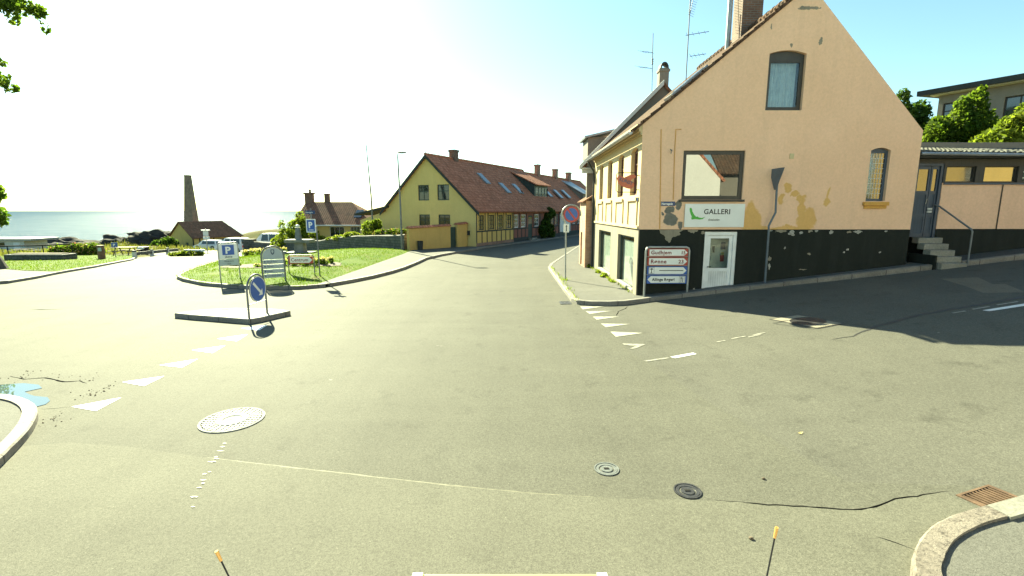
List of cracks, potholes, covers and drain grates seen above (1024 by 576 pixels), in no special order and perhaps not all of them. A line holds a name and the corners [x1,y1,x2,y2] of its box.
crack [717,491,946,510]
utility cover [594,462,619,476]
utility cover [673,483,702,499]
drain grate [956,484,1018,507]
manhole cover [197,407,265,433]
manhole cover [770,315,844,329]
